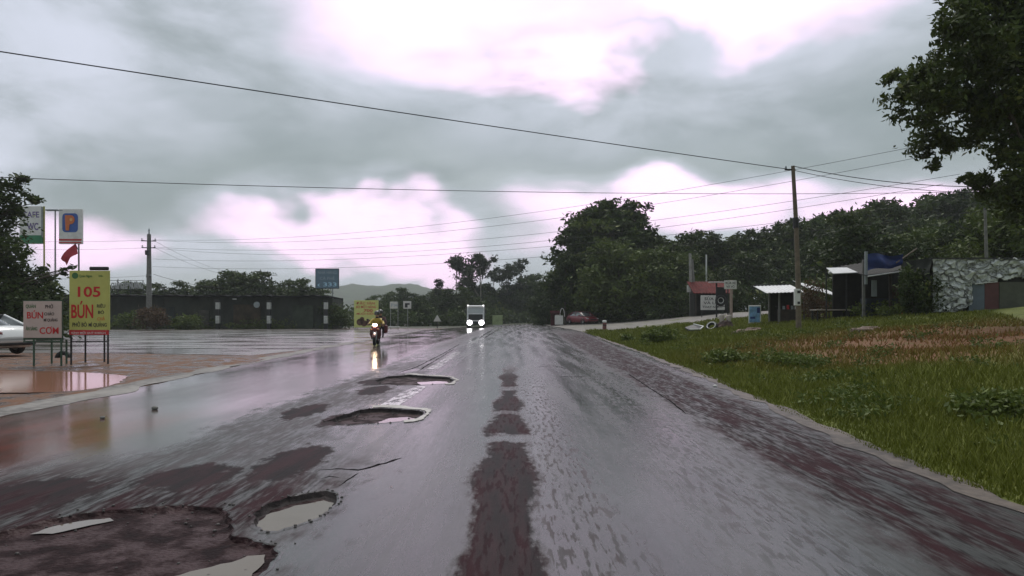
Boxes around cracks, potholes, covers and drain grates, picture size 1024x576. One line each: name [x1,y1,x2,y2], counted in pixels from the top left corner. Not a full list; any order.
crack [321,458,401,486]
pothole [0,501,296,576]
pothole [374,373,459,386]
pothole [247,488,343,534]
pothole [323,405,431,425]
